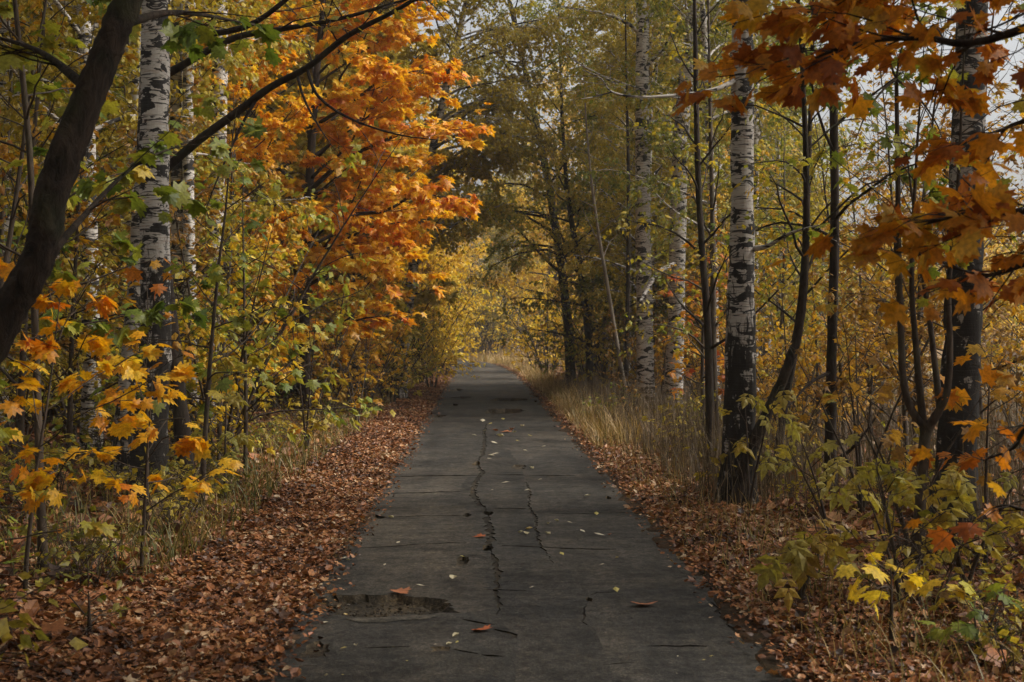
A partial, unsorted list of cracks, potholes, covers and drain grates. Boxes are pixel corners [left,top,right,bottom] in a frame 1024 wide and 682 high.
crack [376,424,629,657]
pothole [315,594,460,622]
pothole [456,556,470,566]
